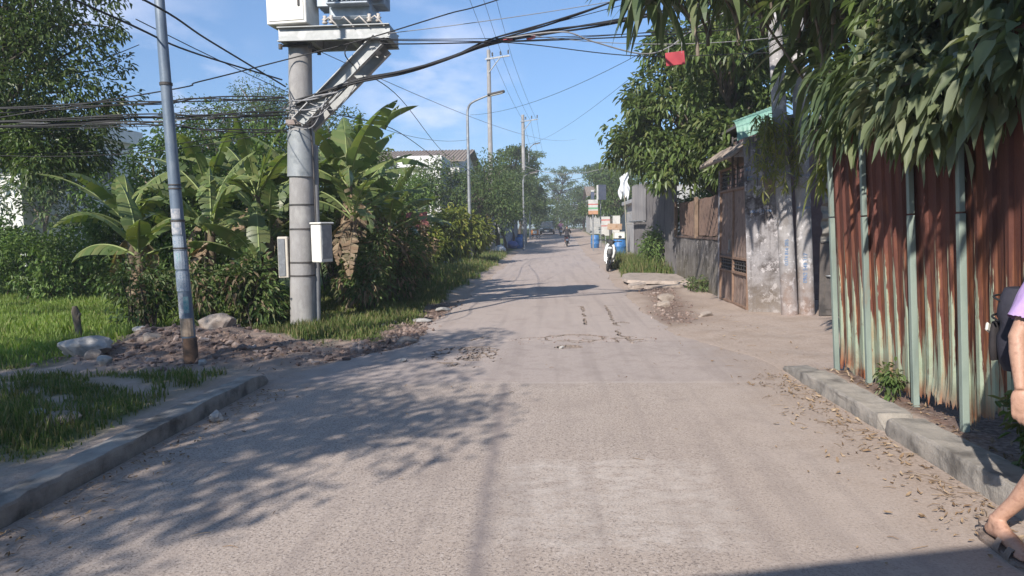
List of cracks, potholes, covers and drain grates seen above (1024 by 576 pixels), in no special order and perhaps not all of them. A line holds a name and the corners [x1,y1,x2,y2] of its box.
crack [520,305,644,343]
